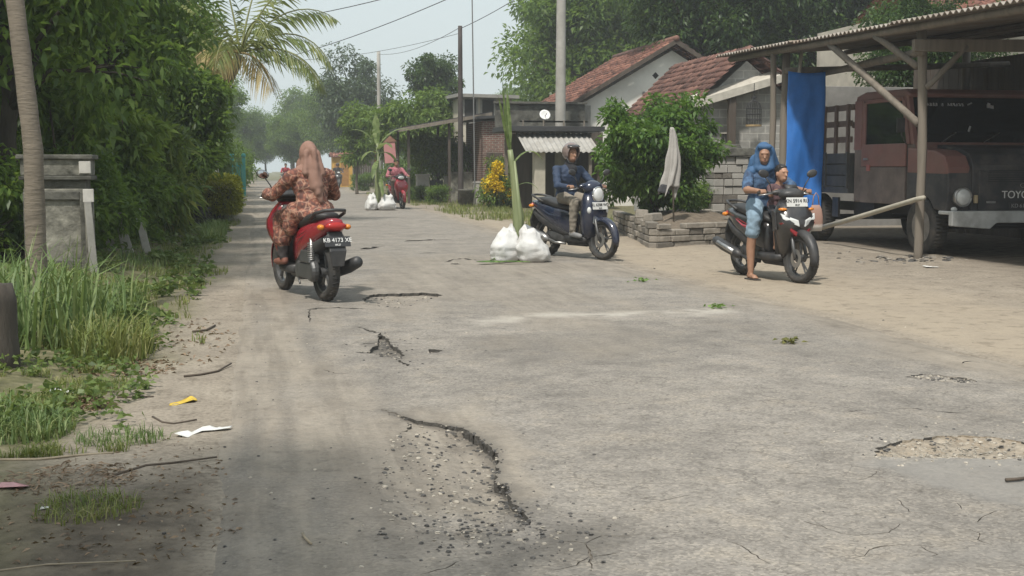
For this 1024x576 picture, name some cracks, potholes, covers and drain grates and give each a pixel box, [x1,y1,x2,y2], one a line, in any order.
crack [556,533,651,570]
pothole [907,374,977,383]
pothole [874,435,1024,460]
crack [804,489,996,559]
pothole [357,327,412,366]
